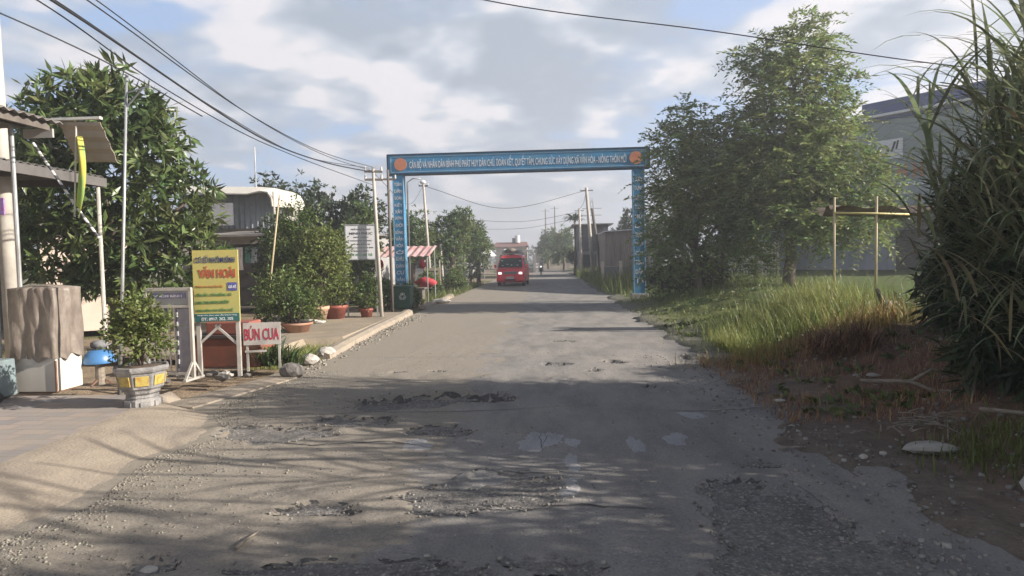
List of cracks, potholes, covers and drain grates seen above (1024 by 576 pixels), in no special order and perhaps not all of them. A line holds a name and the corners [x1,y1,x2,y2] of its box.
pothole [387,468,577,517]
pothole [268,500,361,516]
pothole [306,414,400,428]
pothole [403,424,478,436]
pothole [692,485,946,576]
pothole [337,388,513,412]
pothole [695,475,767,509]
